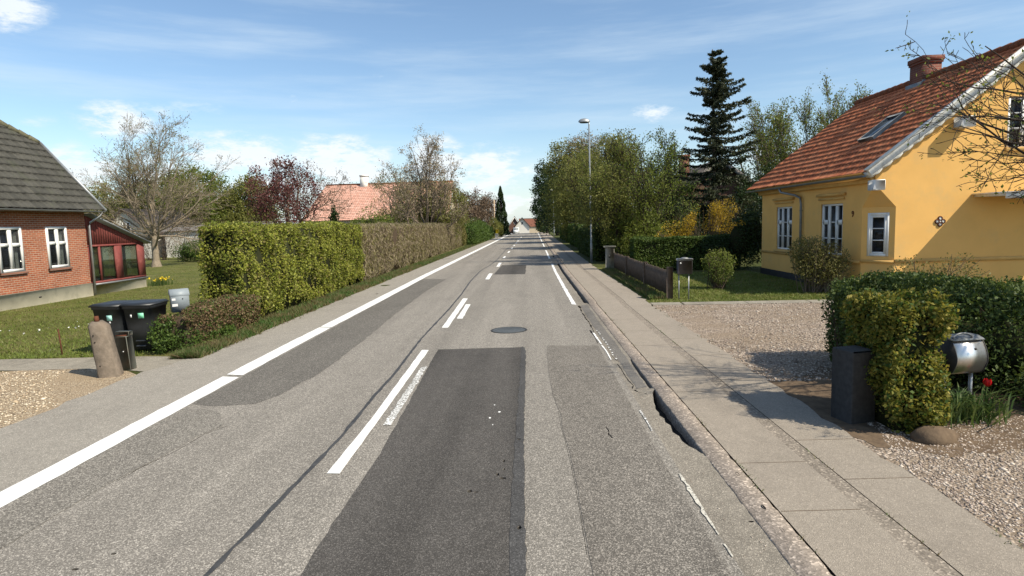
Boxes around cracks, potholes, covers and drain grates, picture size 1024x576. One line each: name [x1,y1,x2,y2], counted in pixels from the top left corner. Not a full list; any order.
pothole [652,391,689,446]
